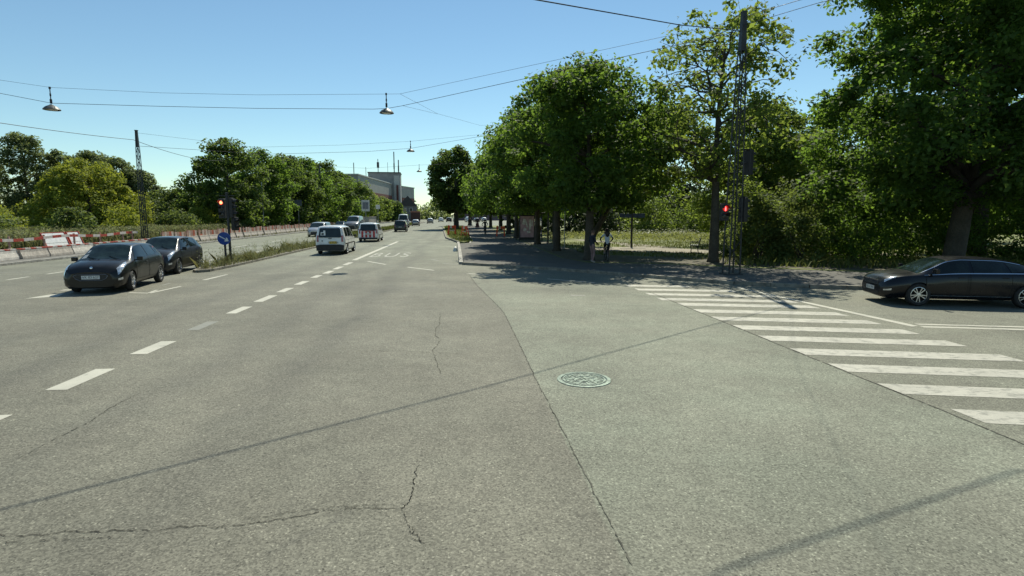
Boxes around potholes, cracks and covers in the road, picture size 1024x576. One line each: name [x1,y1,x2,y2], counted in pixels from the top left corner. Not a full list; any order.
manhole cover [557,372,611,388]
crack [0,464,422,543]
